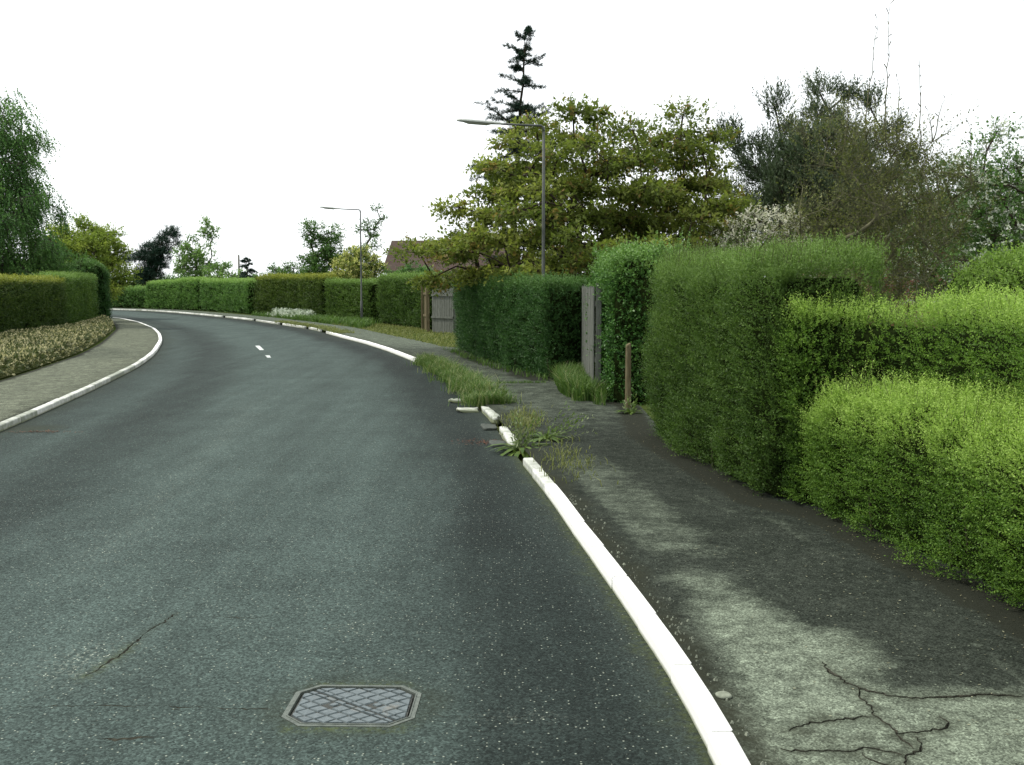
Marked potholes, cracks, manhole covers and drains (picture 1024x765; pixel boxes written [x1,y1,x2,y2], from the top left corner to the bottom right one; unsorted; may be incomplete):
manhole cover [281,685,422,727]
crack [86,615,173,675]
crack [781,663,1022,765]
